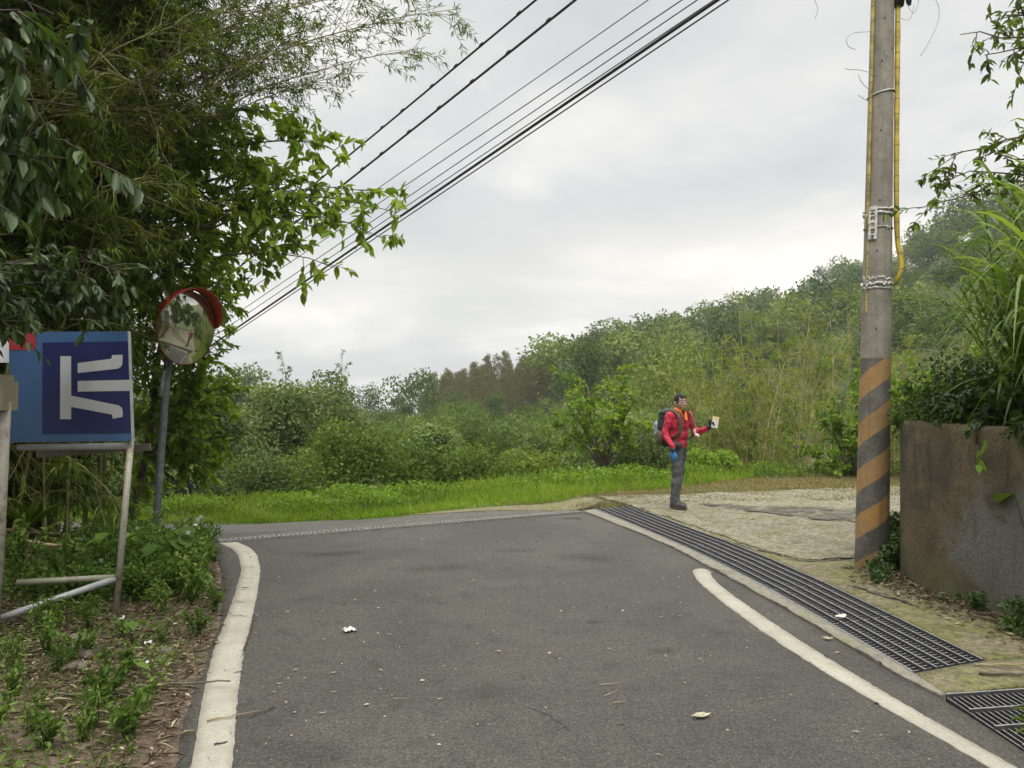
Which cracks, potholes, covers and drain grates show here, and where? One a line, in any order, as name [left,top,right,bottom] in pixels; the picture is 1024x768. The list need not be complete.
drain grate [595,507,657,519]
drain grate [946,688,1024,752]
drain grate [618,516,688,531]
drain grate [647,527,727,546]
drain grate [682,541,771,565]
drain grate [768,582,890,624]
drain grate [828,614,983,673]
drain grate [721,559,824,590]
